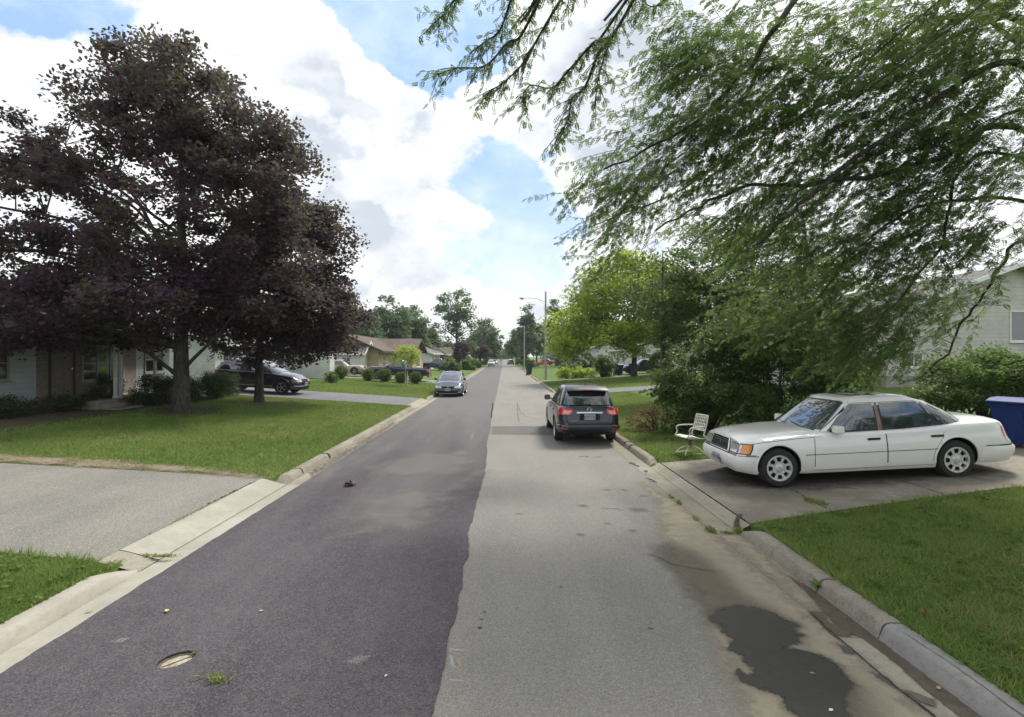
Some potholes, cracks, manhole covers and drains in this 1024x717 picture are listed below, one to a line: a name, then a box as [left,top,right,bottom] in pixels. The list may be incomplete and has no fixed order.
manhole cover [157,653,195,668]
